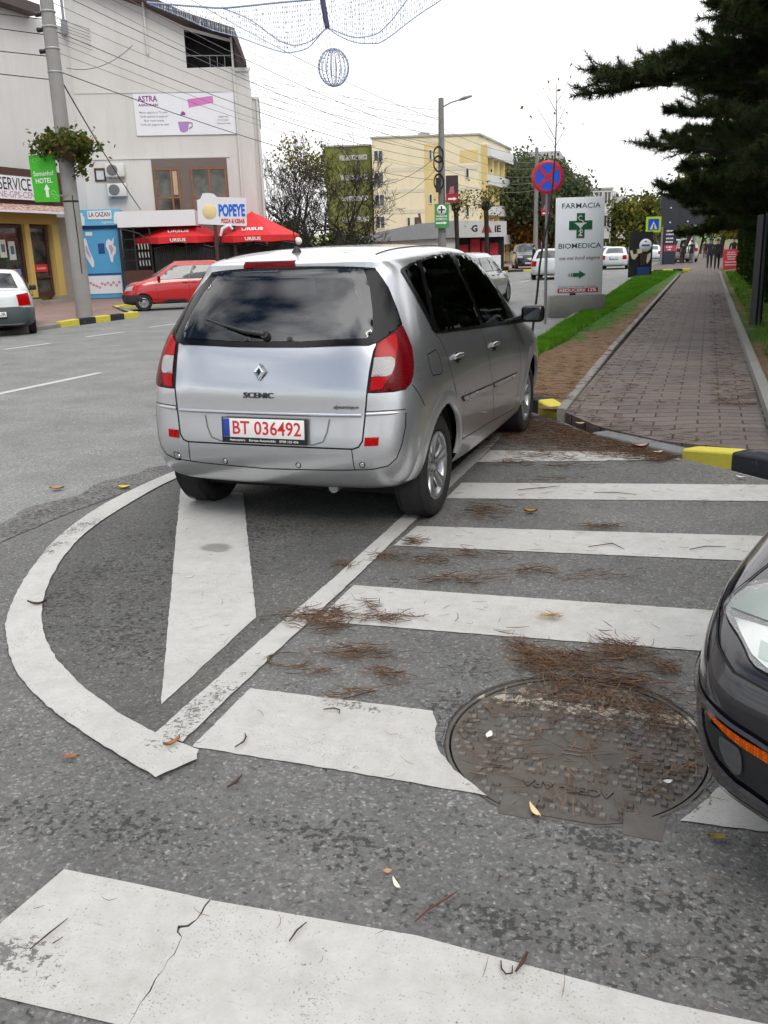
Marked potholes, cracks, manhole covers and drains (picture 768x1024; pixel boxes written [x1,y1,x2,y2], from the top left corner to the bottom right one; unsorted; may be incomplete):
manhole cover [440,674,715,842]
